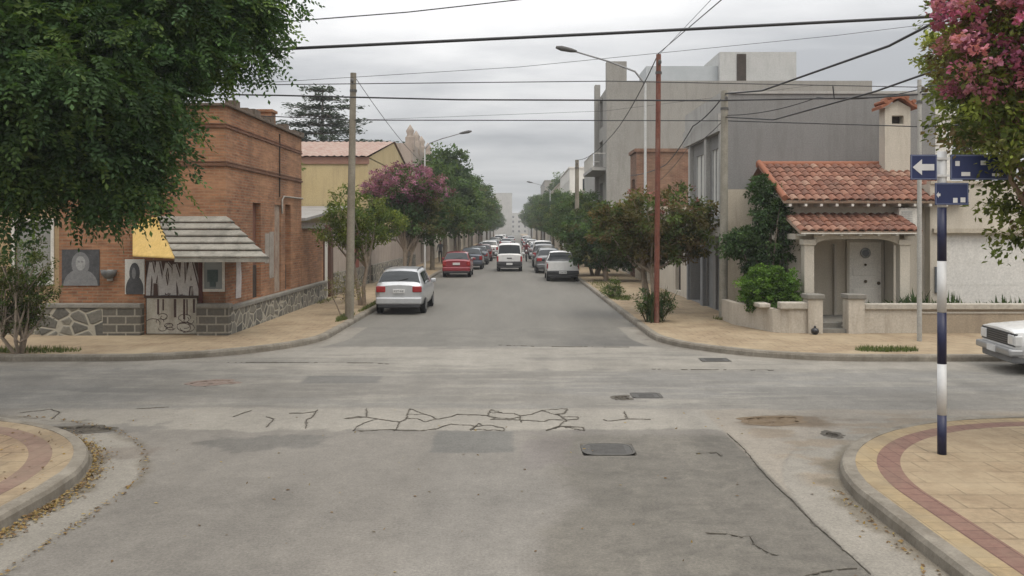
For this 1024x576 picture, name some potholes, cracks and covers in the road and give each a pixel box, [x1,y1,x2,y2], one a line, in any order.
crack [344,408,585,432]
manhole cover [581,443,636,456]
crack [696,433,871,576]
crack [233,410,318,429]
pothole [54,425,119,434]
pothole [820,430,846,439]
